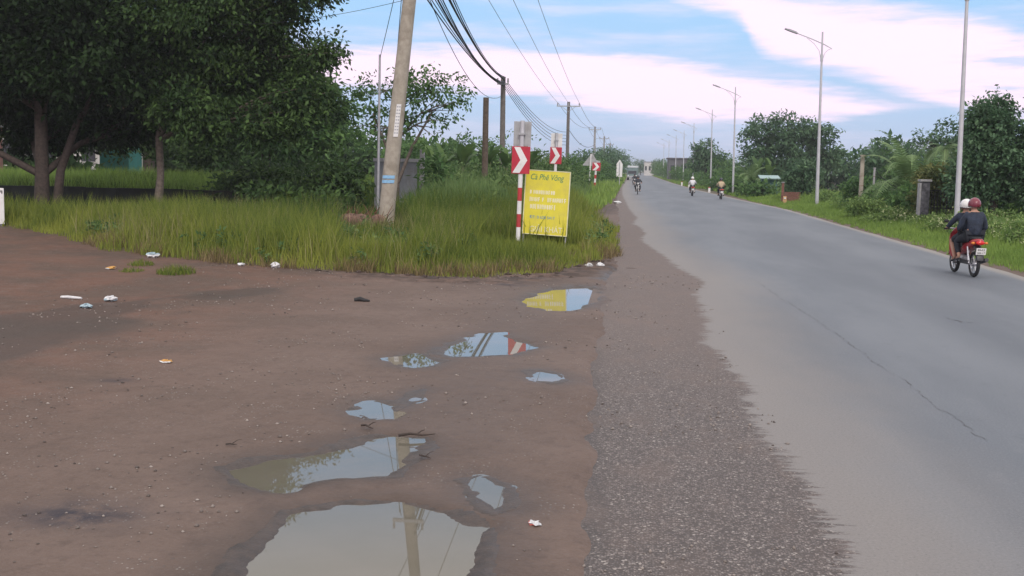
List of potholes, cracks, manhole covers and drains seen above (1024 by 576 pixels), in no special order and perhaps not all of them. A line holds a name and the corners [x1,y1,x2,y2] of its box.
pothole [380,352,452,368]
pothole [213,434,440,493]
pothole [345,389,428,420]
pothole [521,285,602,311]
pothole [521,369,569,384]
pothole [453,474,522,520]
crack [751,278,986,440]
pothole [426,332,541,358]
pothole [210,499,500,576]
